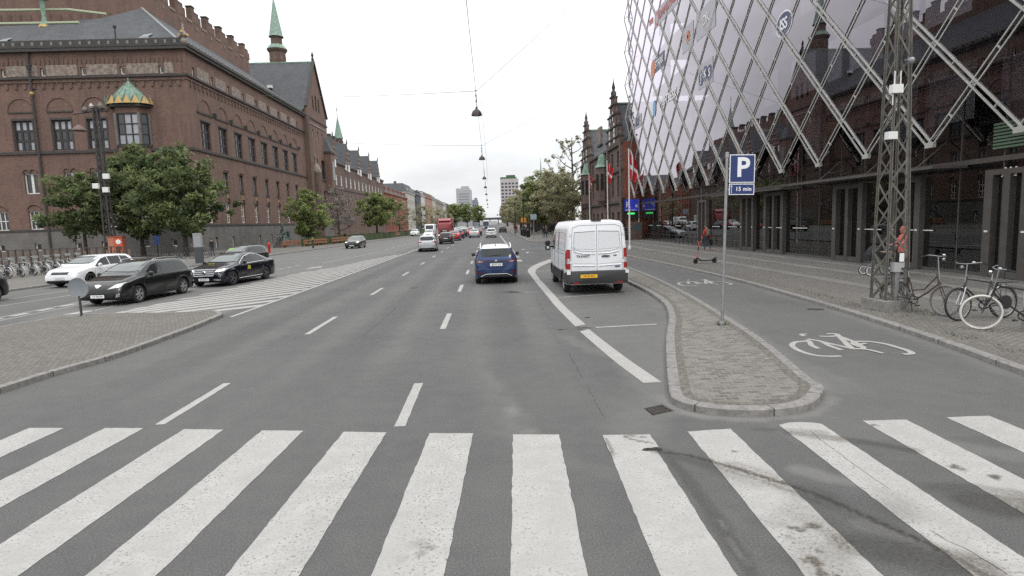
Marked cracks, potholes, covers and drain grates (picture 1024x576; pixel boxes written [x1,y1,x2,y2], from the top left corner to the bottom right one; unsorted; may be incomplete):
drain grate [644,405,673,416]
